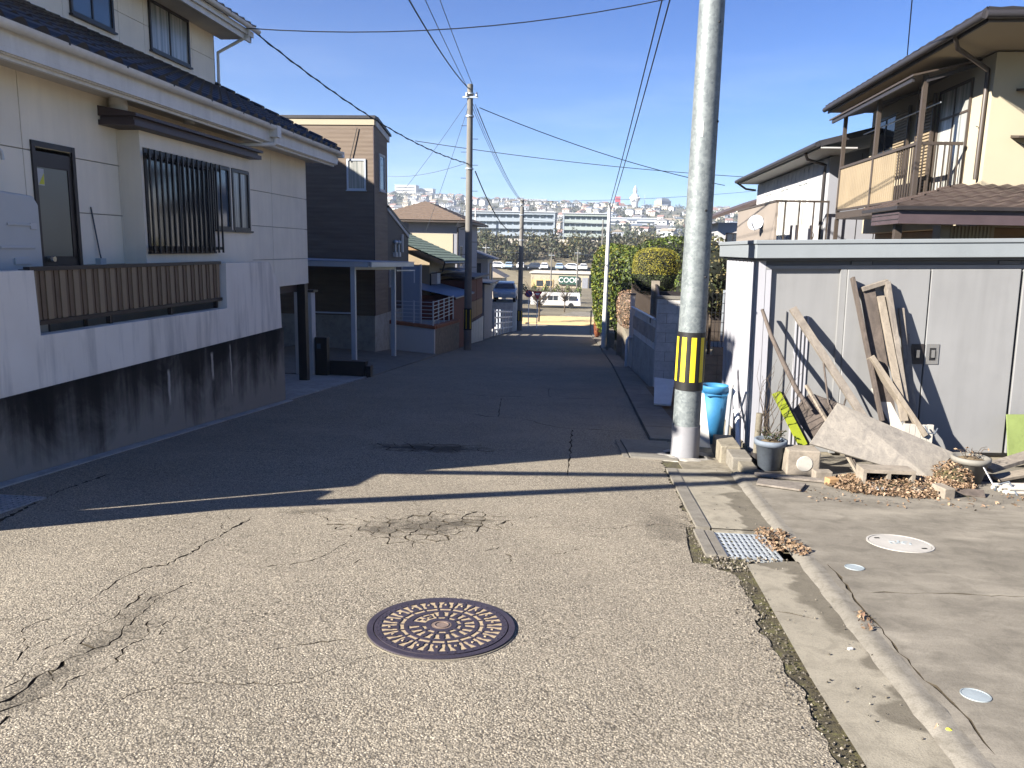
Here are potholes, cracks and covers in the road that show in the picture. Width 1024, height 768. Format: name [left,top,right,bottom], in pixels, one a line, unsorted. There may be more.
crack [259,543,360,568]
crack [0,516,251,725]
drain grate [693,529,784,564]
manhole cover [960,688,992,703]
crack [471,390,623,432]
manhole cover [866,534,935,553]
manhole cover [365,598,517,661]
crack [301,510,673,562]
